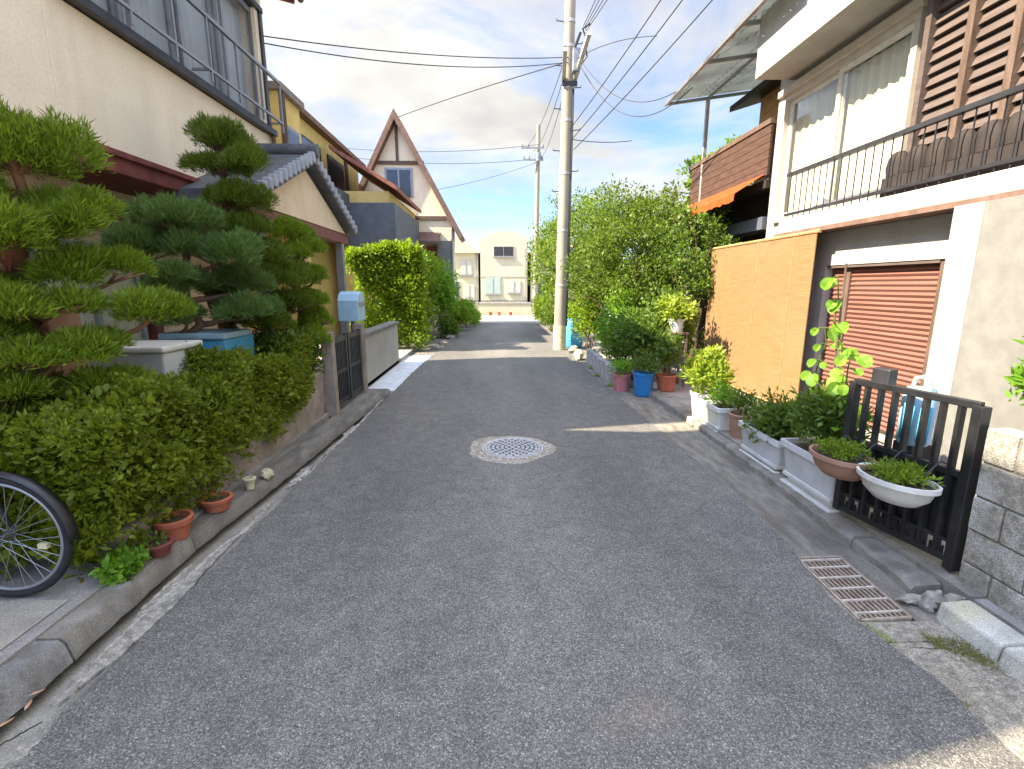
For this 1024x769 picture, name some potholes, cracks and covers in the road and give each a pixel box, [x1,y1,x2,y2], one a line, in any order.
drain grate [799,555,912,622]
crack [0,722,43,746]
manhole cover [469,436,557,464]
